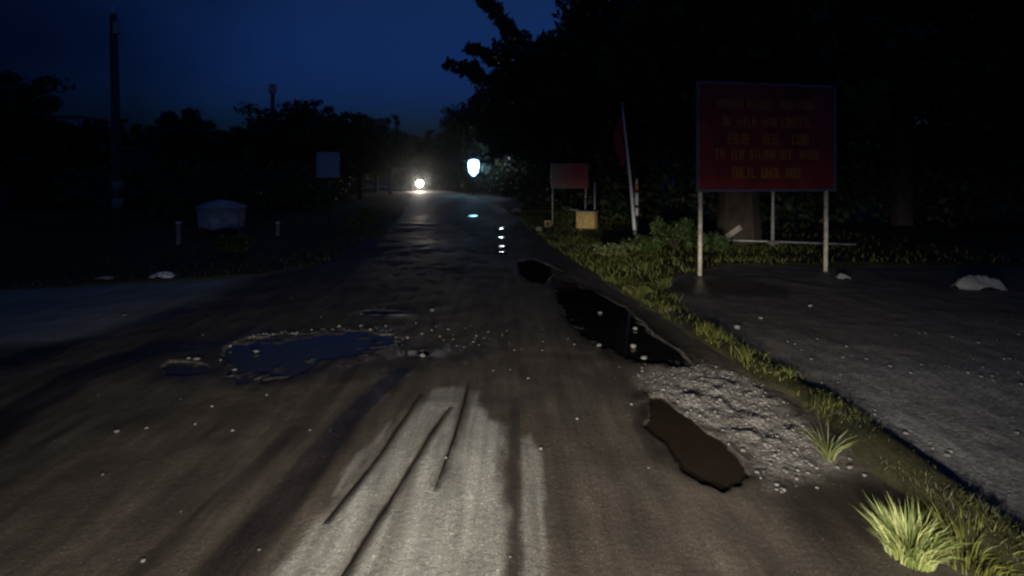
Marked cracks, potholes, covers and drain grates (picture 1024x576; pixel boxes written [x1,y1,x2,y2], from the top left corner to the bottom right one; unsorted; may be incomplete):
pothole [635,390,760,499]
pothole [209,327,412,388]
pothole [153,358,217,378]
pothole [552,276,698,372]
pothole [514,257,568,285]
